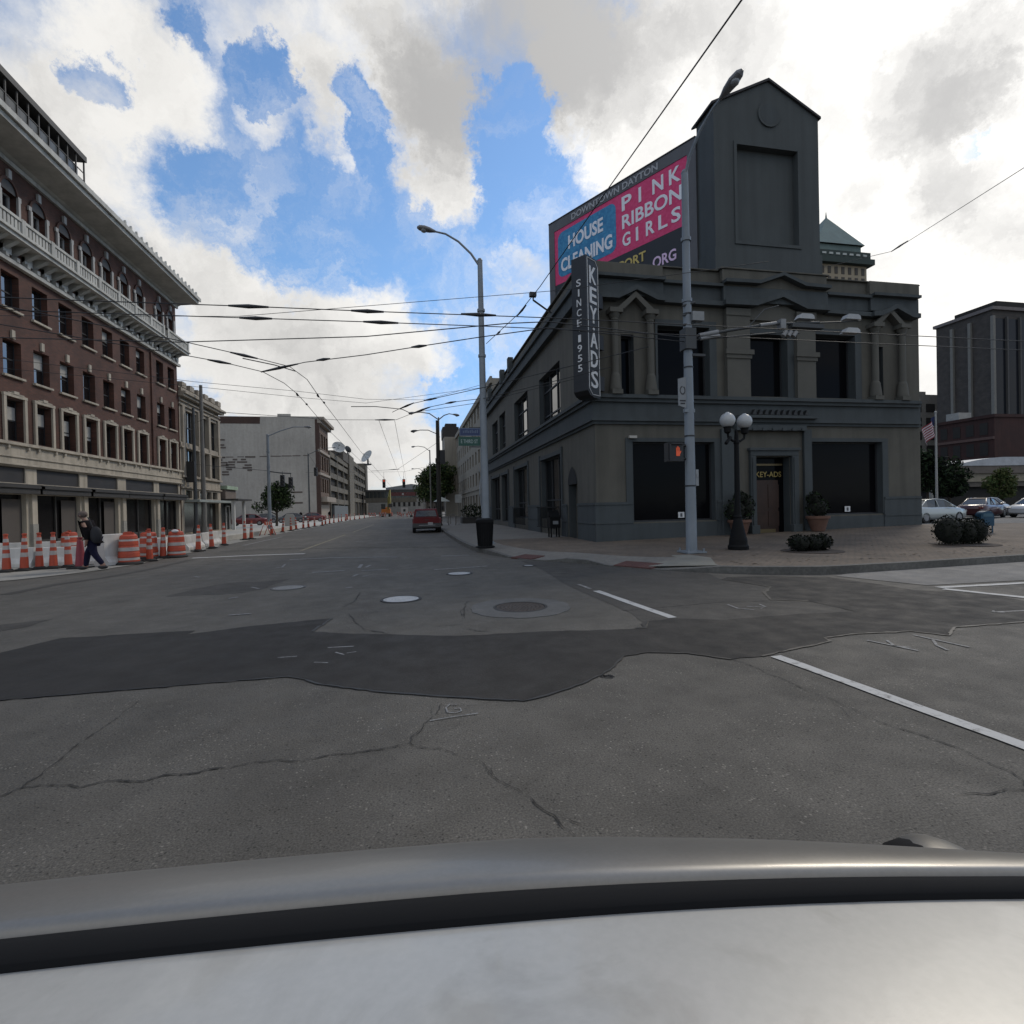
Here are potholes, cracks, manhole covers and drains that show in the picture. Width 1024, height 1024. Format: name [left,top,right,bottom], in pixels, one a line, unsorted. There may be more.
crack [0,698,580,834]
manhole cover [380,595,422,603]
manhole cover [471,598,570,619]
